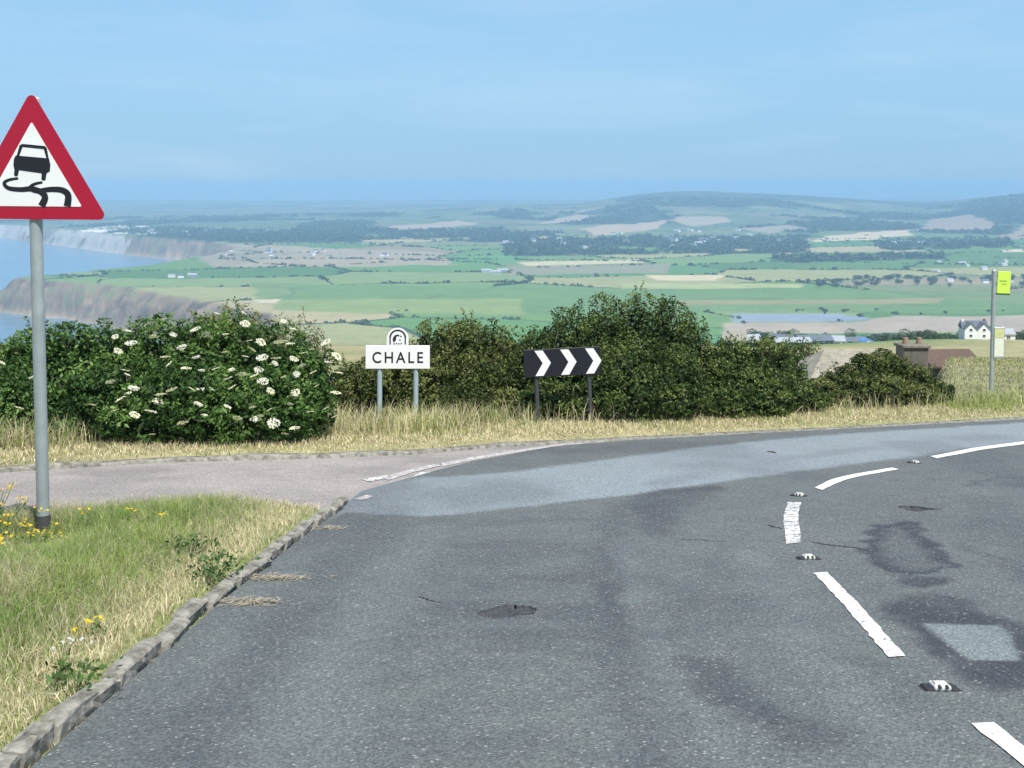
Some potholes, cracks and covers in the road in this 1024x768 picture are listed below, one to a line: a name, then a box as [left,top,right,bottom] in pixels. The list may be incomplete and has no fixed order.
crack [812,542,870,551]
pothole [478,604,537,618]
